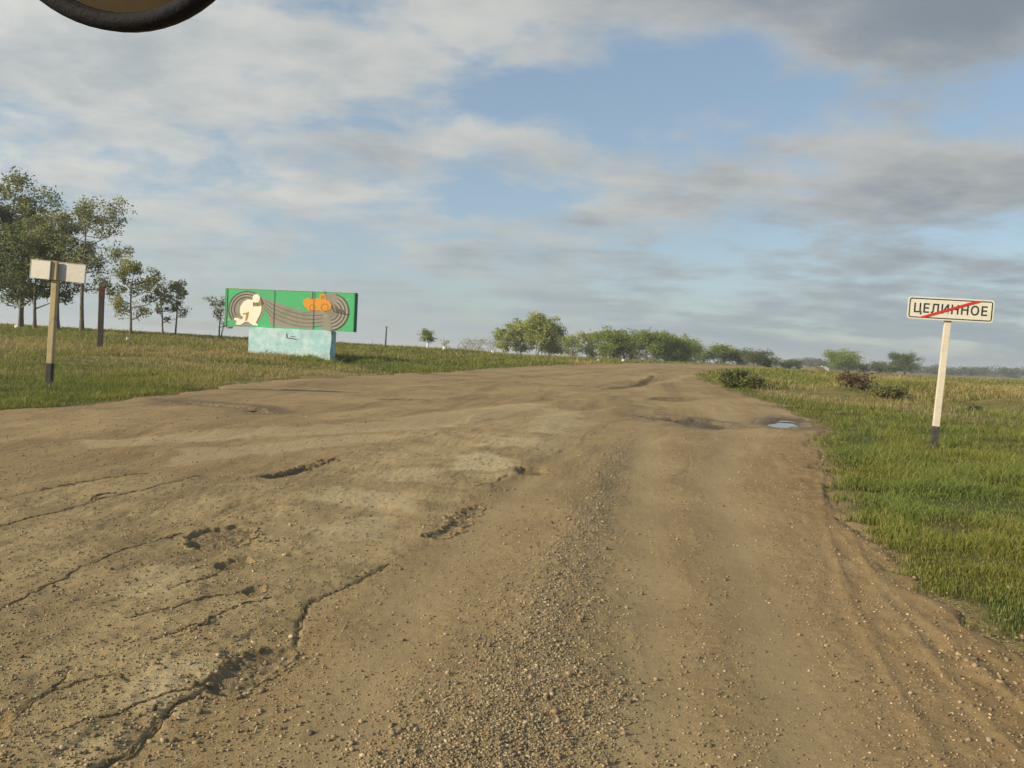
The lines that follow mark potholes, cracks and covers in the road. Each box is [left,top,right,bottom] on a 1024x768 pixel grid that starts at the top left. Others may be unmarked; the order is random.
pothole [418,502,486,540]
crack [0,533,180,610]
pothole [754,415,814,429]
pothole [634,415,739,430]
pothole [208,555,258,572]
pothole [246,455,343,479]
pothole [604,375,659,390]
pothole [179,524,260,552]
crack [0,473,204,527]
pothole [234,584,269,598]
crack [1,563,388,768]
